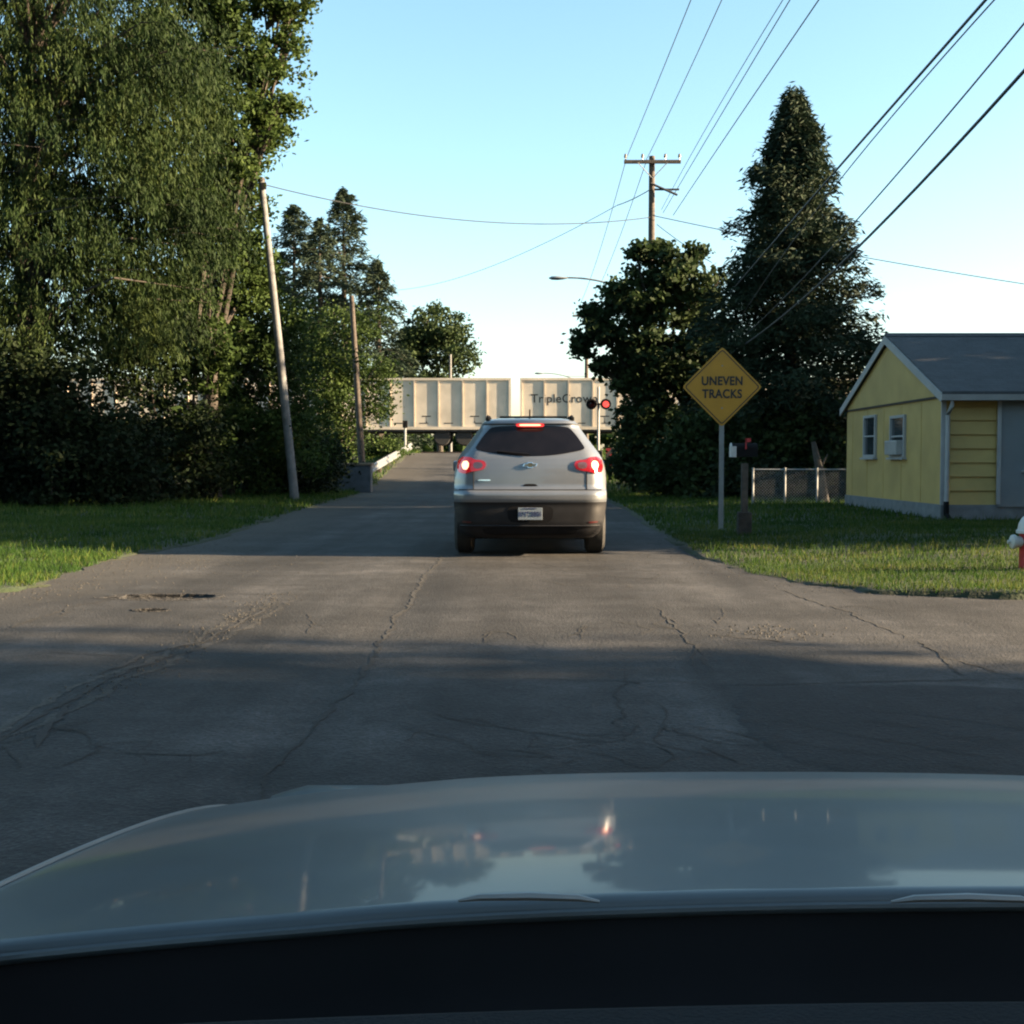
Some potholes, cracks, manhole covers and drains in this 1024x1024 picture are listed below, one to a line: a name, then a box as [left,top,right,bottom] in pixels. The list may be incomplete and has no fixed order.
crack [765,587,1023,685]
crack [0,559,781,771]
pothole [93,593,226,601]
